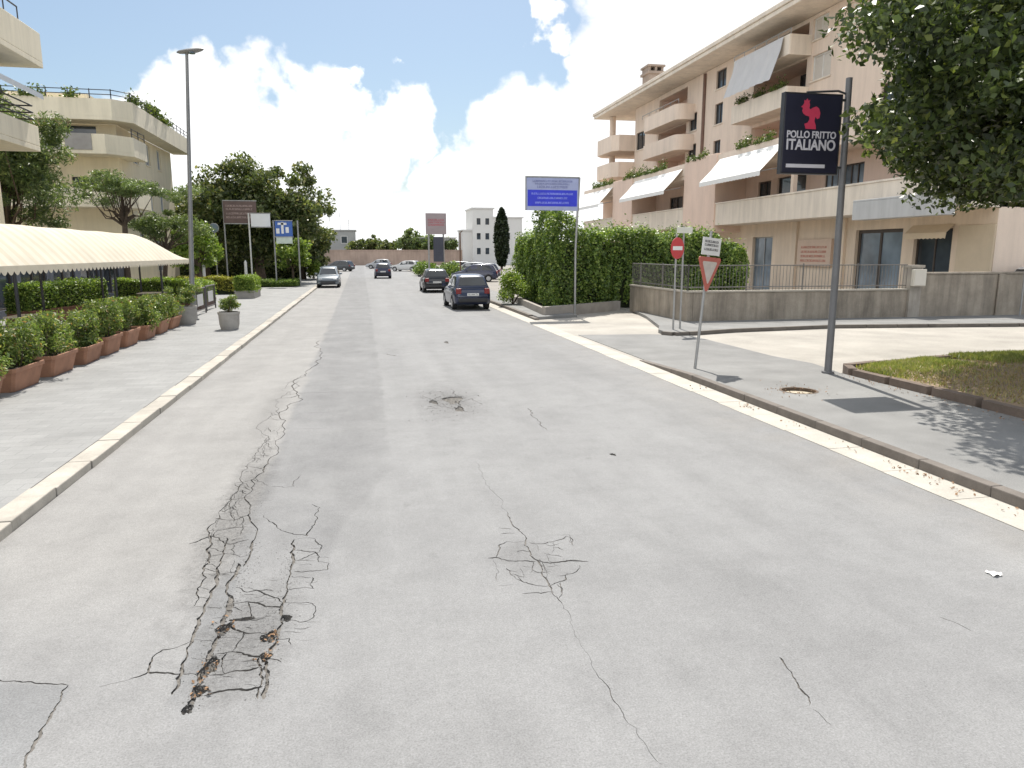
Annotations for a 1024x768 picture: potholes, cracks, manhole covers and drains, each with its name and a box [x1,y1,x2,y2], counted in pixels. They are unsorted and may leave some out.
crack [99,342,329,712]
crack [476,462,662,765]
crack [779,657,830,724]
